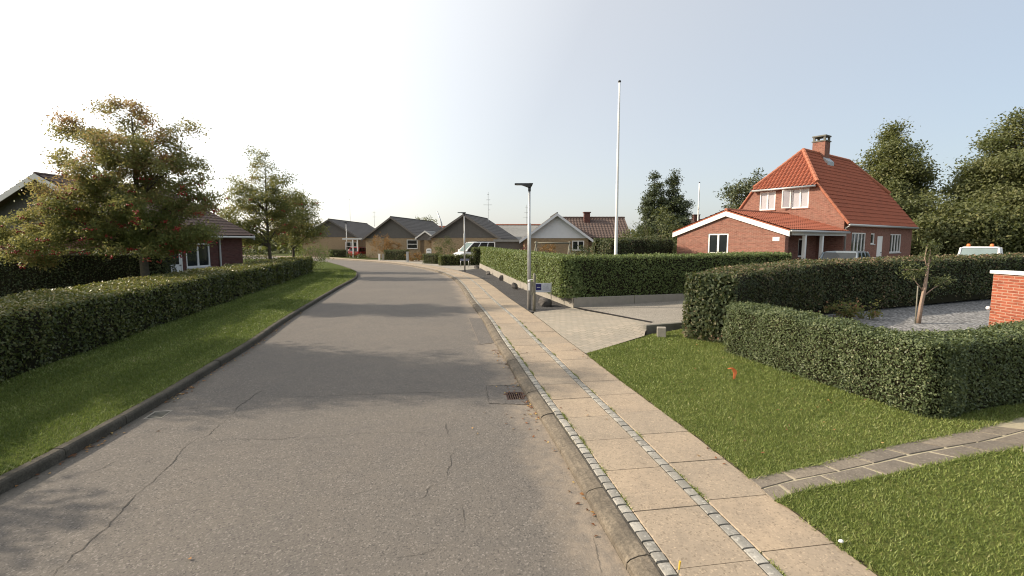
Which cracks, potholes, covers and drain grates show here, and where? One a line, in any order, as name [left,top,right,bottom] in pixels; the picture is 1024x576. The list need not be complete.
crack [54,393,413,574]
drain grate [505,392,525,400]
